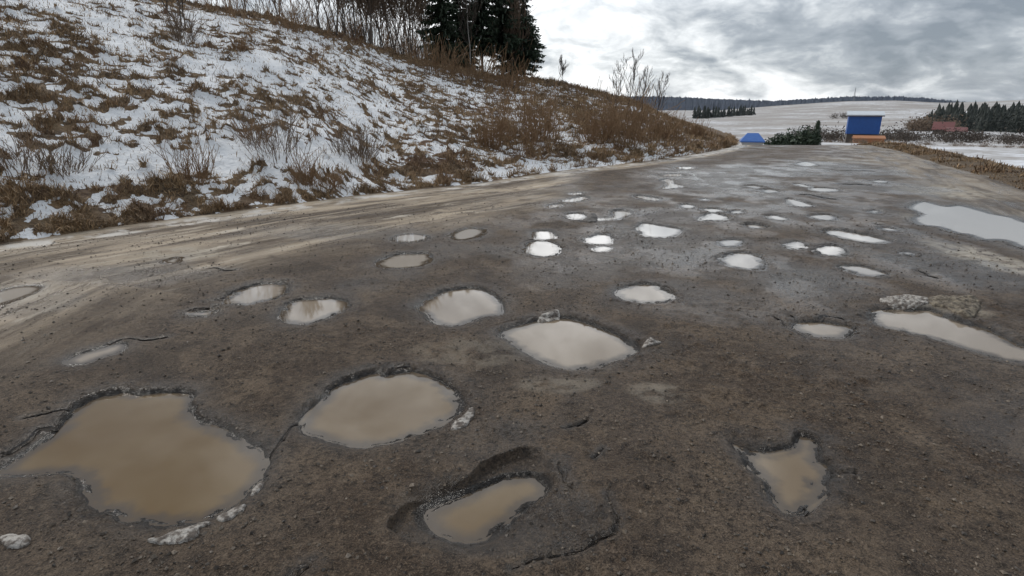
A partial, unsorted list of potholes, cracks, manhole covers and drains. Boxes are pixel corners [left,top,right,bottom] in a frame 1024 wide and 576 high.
pothole [710,249,777,272]
pothole [0,282,51,307]
pothole [287,417,653,576]
crack [513,495,619,569]
pothole [47,339,139,371]
pothole [630,221,688,239]
pothole [603,279,684,306]
pothole [0,381,292,543]
pothole [777,315,868,342]
pothole [716,424,856,526]
pothole [210,278,297,308]
pothole [401,283,514,330]
